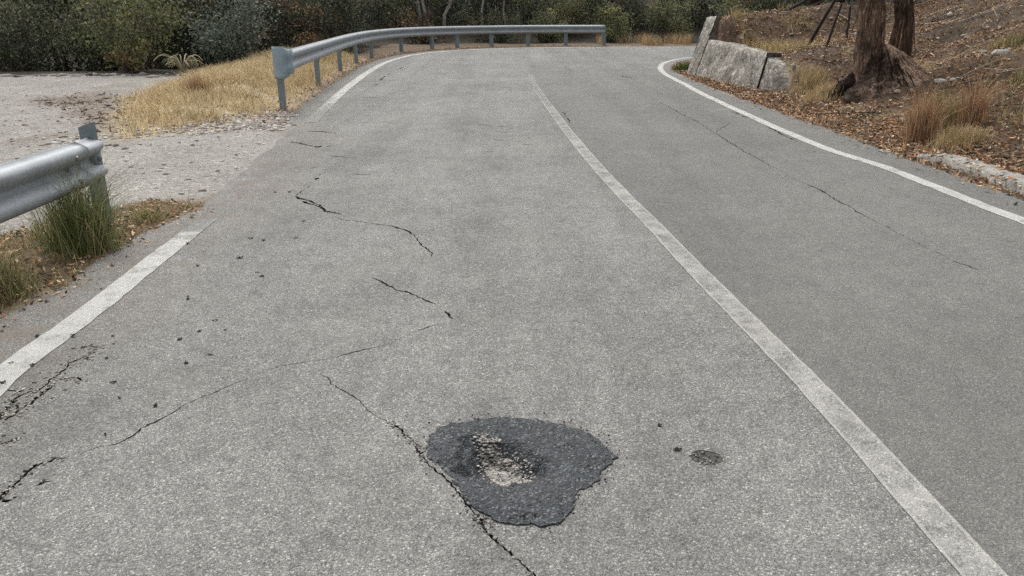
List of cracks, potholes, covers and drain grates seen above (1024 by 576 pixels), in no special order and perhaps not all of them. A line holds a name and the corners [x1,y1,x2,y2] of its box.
crack [295,167,433,257]
crack [324,376,541,576]
crack [0,341,115,503]
crack [373,278,453,319]
crack [661,103,979,271]
